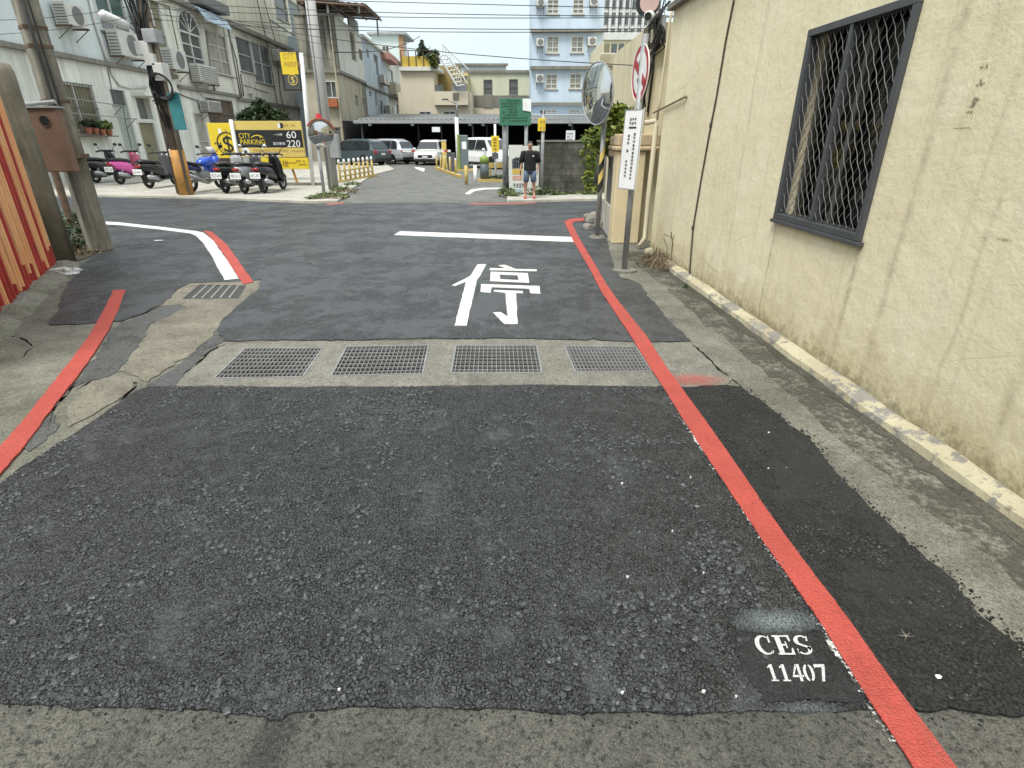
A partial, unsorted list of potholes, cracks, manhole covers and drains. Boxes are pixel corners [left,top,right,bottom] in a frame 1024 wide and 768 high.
drain grate [450,345,543,373]
drain grate [564,345,652,372]
drain grate [183,285,247,299]
drain grate [212,347,324,379]
crack [693,345,741,386]
crack [75,379,138,401]
drain grate [330,345,429,376]
